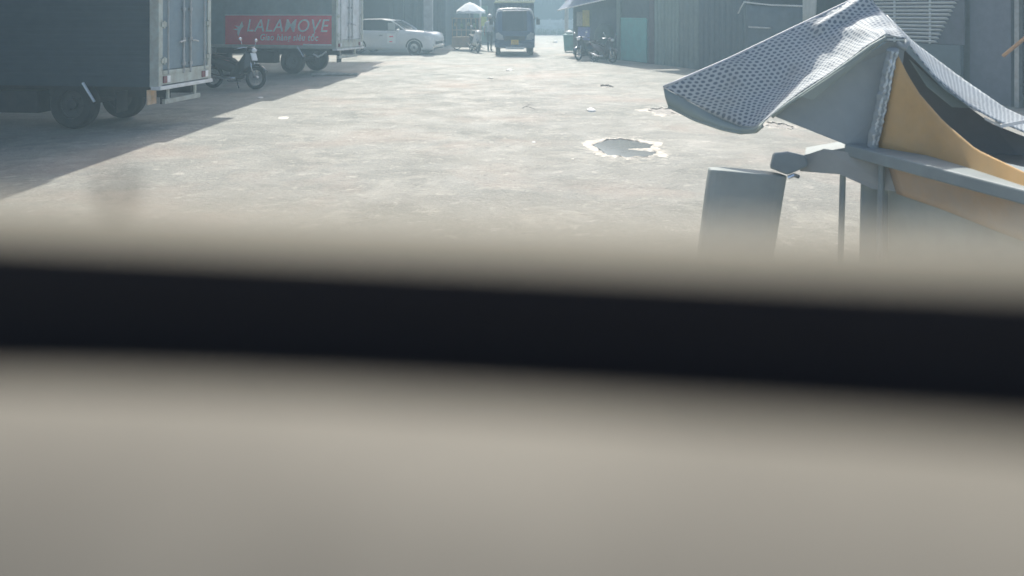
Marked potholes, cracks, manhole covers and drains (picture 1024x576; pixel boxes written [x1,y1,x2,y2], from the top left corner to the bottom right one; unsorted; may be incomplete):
pothole [637,107,683,117]
pothole [582,137,669,160]
